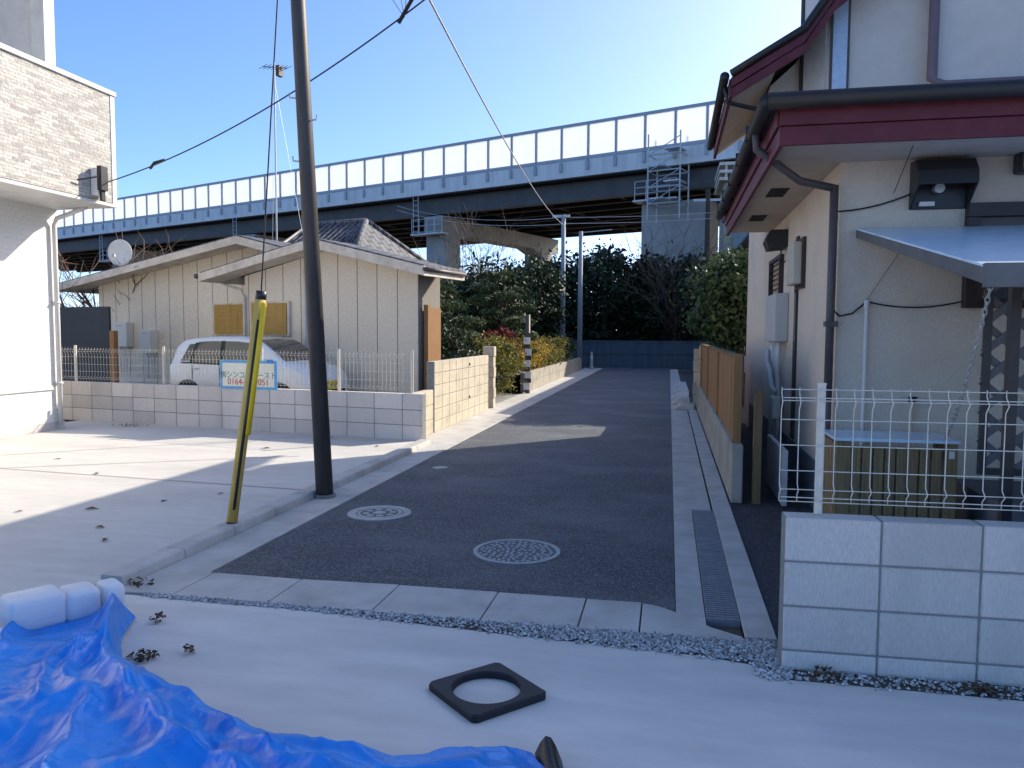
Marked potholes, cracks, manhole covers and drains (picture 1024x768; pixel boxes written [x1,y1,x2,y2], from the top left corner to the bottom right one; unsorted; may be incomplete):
manhole cover [473,539,560,564]
manhole cover [347,505,411,521]
drain grate [692,510,740,628]
